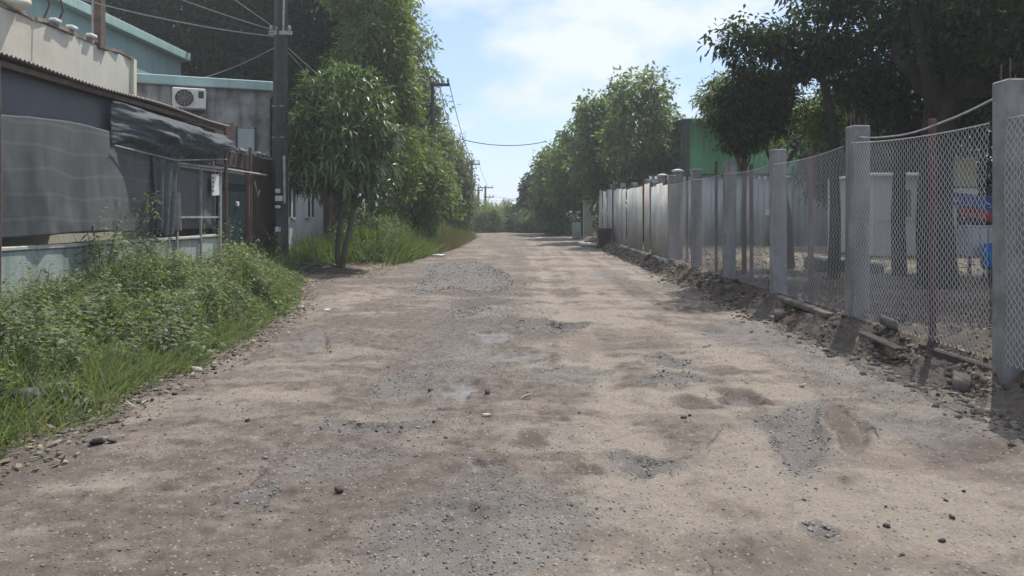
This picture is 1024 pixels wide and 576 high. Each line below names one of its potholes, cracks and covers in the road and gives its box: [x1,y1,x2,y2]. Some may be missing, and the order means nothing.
pothole [645,353,690,369]
pothole [801,521,840,541]
pothole [610,451,680,479]
pothole [518,320,587,334]
pothole [641,371,707,386]
pothole [754,405,832,475]
